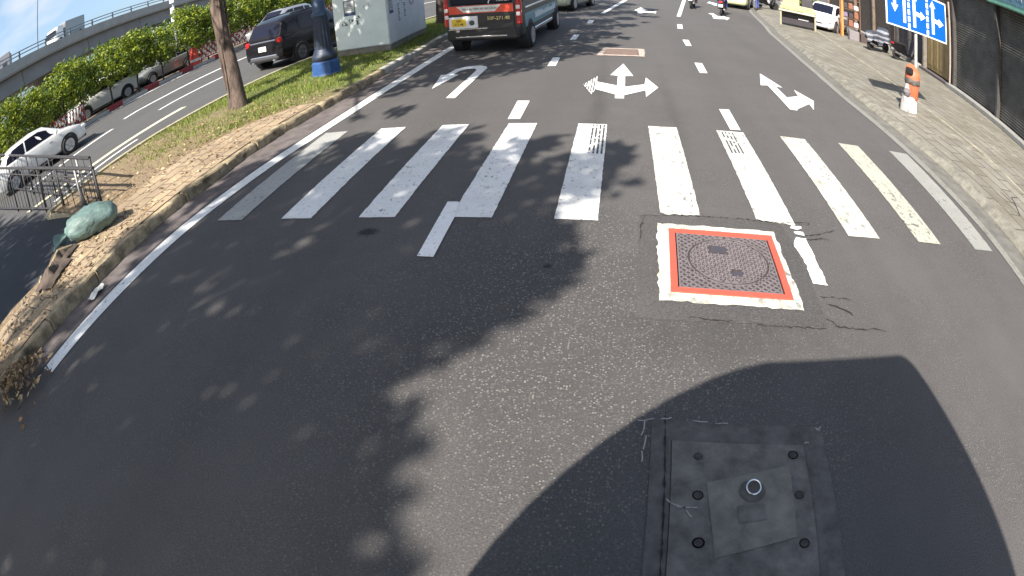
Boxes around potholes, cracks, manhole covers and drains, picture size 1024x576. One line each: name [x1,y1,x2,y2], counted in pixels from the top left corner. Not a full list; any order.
manhole cover [656,223,804,310]
crack [761,296,884,331]
manhole cover [638,417,845,576]
manhole cover [597,48,645,57]
